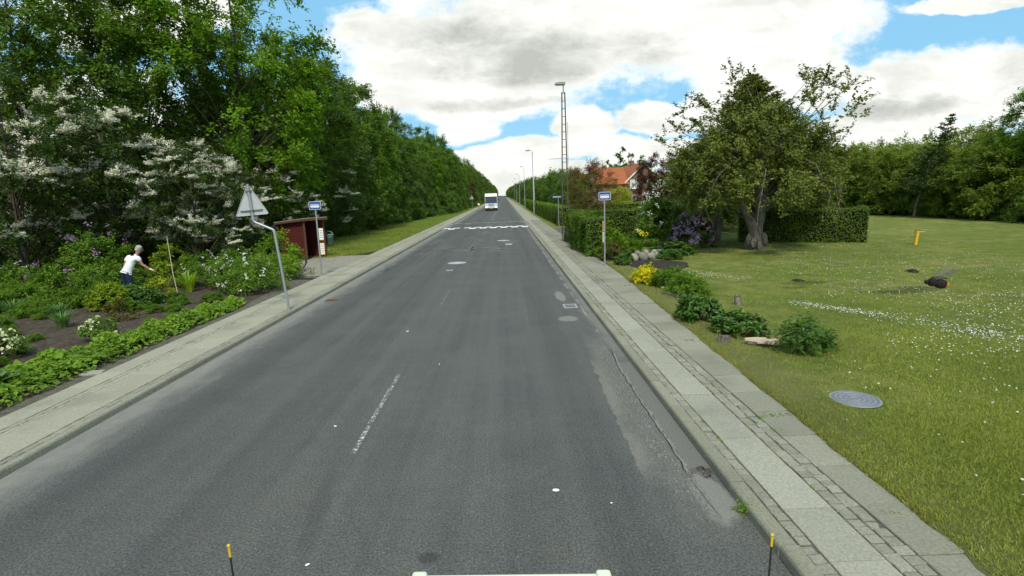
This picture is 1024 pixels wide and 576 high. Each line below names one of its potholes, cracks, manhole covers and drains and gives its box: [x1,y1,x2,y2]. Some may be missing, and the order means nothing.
crack [611,348,720,515]
manhole cover [829,391,883,408]
